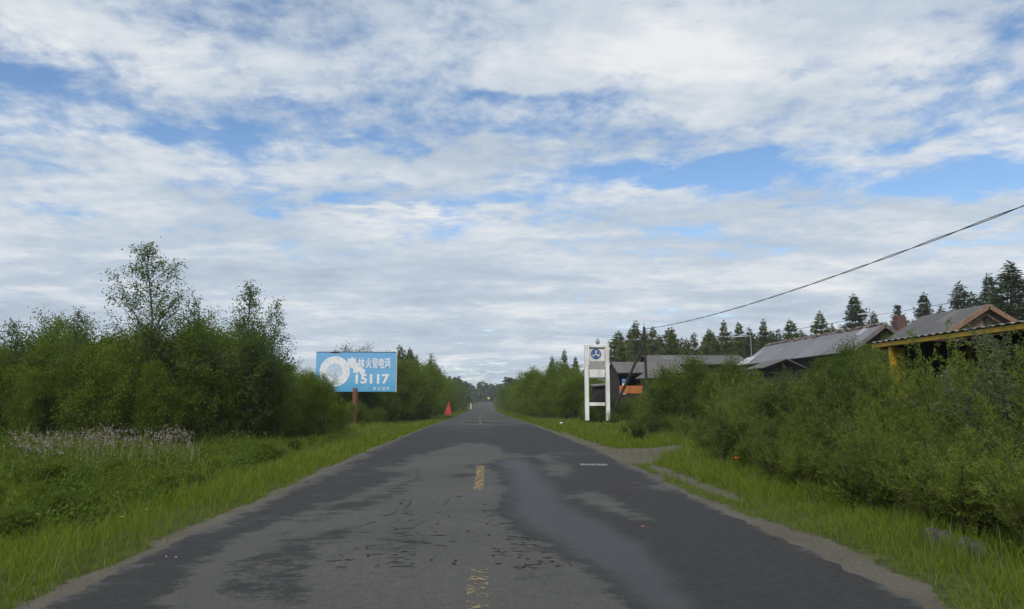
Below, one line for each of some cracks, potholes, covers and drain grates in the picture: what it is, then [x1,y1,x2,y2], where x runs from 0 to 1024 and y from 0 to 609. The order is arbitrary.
crack [483,505,572,568]
crack [328,468,457,568]
